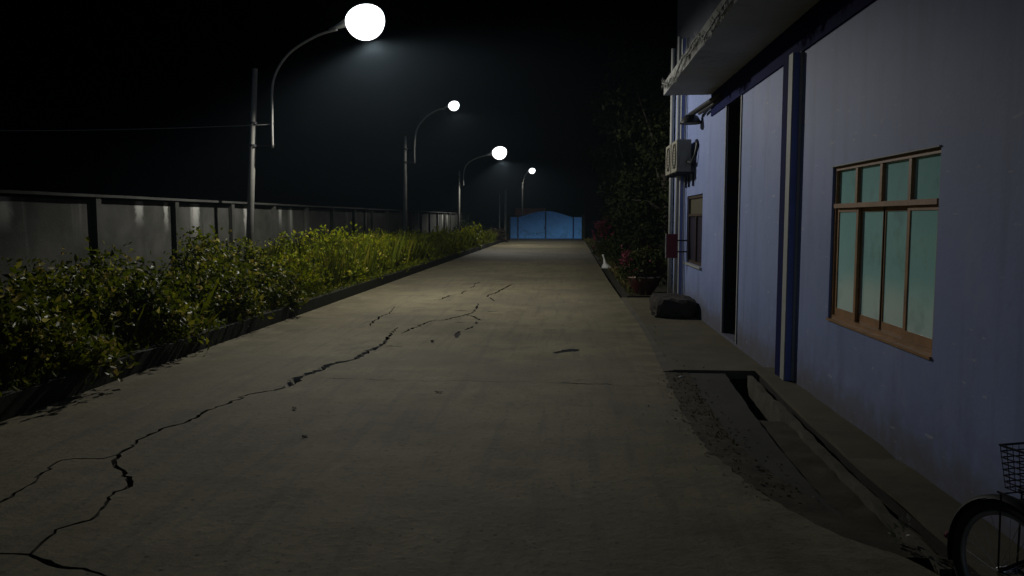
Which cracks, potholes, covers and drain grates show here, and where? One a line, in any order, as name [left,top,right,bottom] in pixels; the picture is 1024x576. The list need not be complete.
crack [0,282,619,576]
